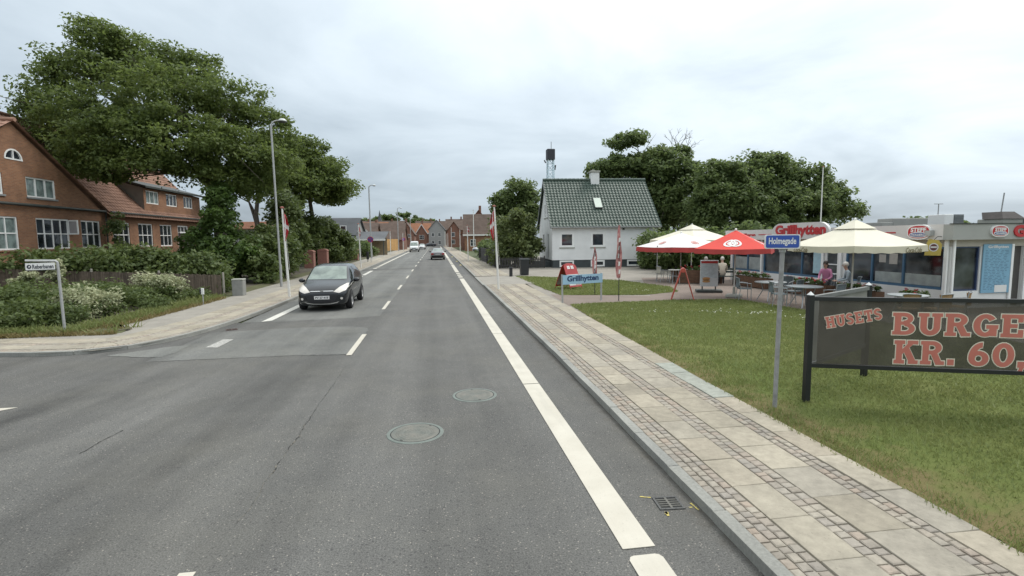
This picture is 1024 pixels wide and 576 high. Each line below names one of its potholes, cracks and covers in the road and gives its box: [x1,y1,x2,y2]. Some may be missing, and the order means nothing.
drain grate [652,496,686,510]
crack [239,379,337,520]
manhole cover [452,388,497,402]
manhole cover [386,423,444,444]
